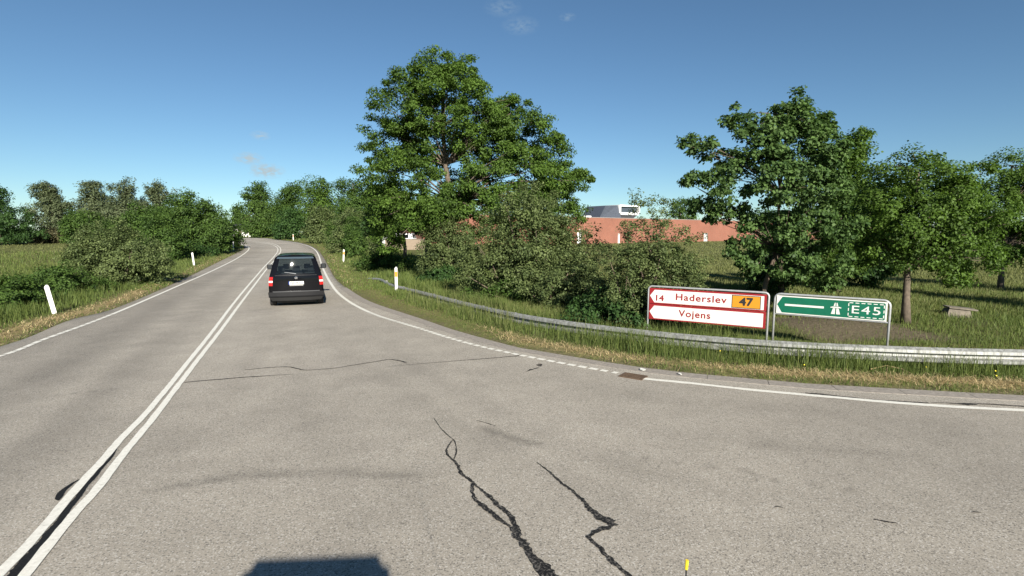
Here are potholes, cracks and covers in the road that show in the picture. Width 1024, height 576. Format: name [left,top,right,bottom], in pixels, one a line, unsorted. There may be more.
crack [184,355,538,383]
